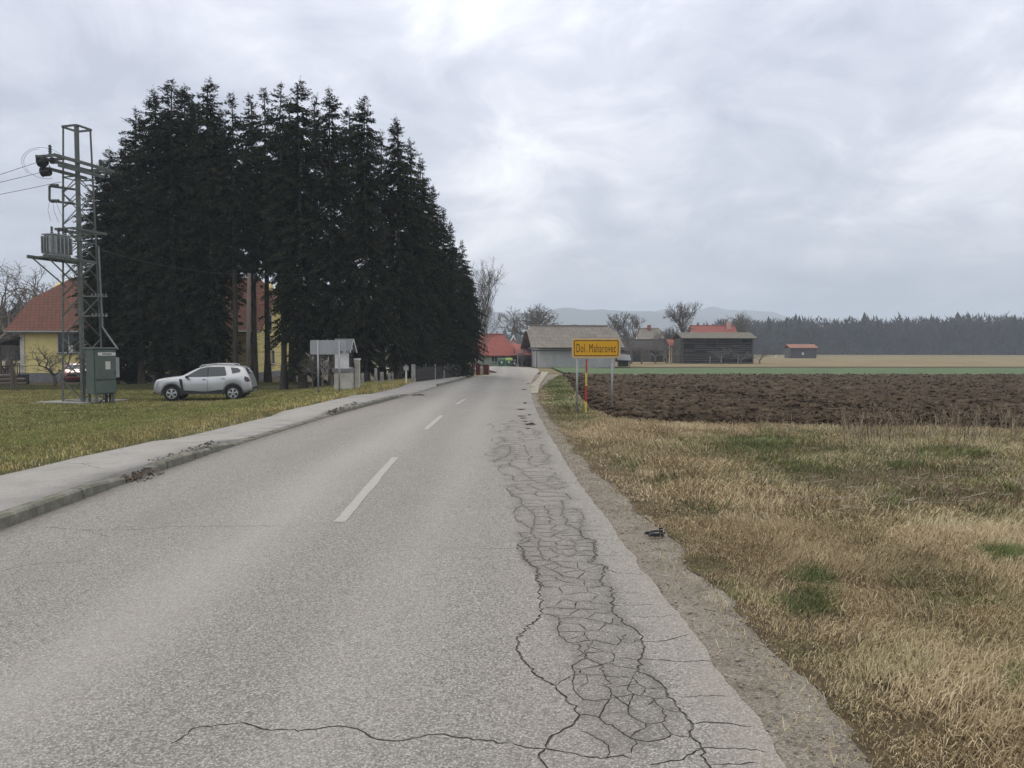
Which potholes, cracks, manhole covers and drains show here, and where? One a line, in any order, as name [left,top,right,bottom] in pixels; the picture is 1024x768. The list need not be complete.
crack [172,420,764,768]
